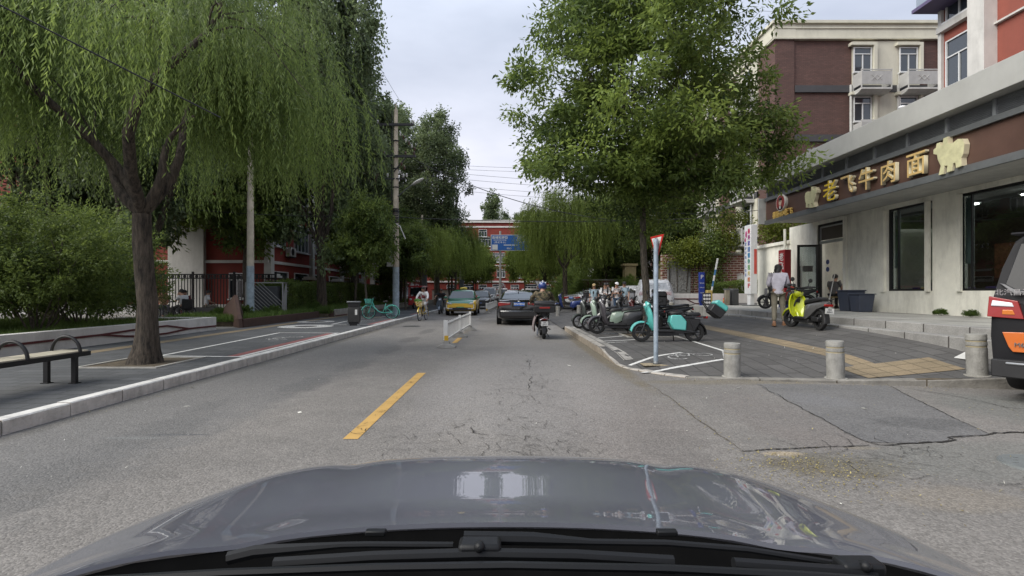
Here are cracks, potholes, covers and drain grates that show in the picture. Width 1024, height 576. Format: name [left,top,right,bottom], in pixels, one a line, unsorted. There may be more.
crack [745,386,1024,487]
crack [350,355,602,457]
